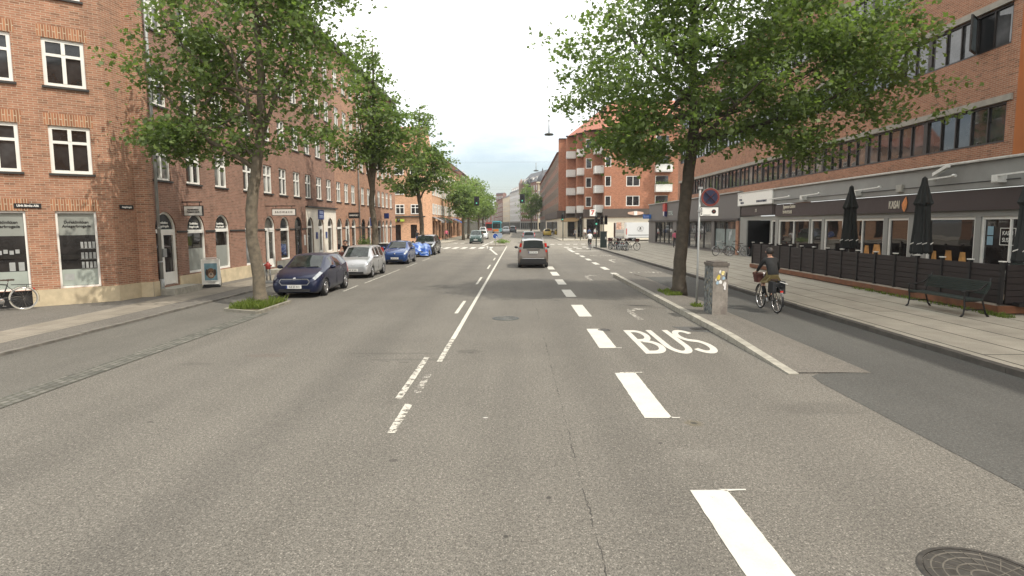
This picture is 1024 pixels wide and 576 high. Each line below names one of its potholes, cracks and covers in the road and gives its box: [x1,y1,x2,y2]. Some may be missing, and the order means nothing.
manhole cover [915,546,1024,576]
